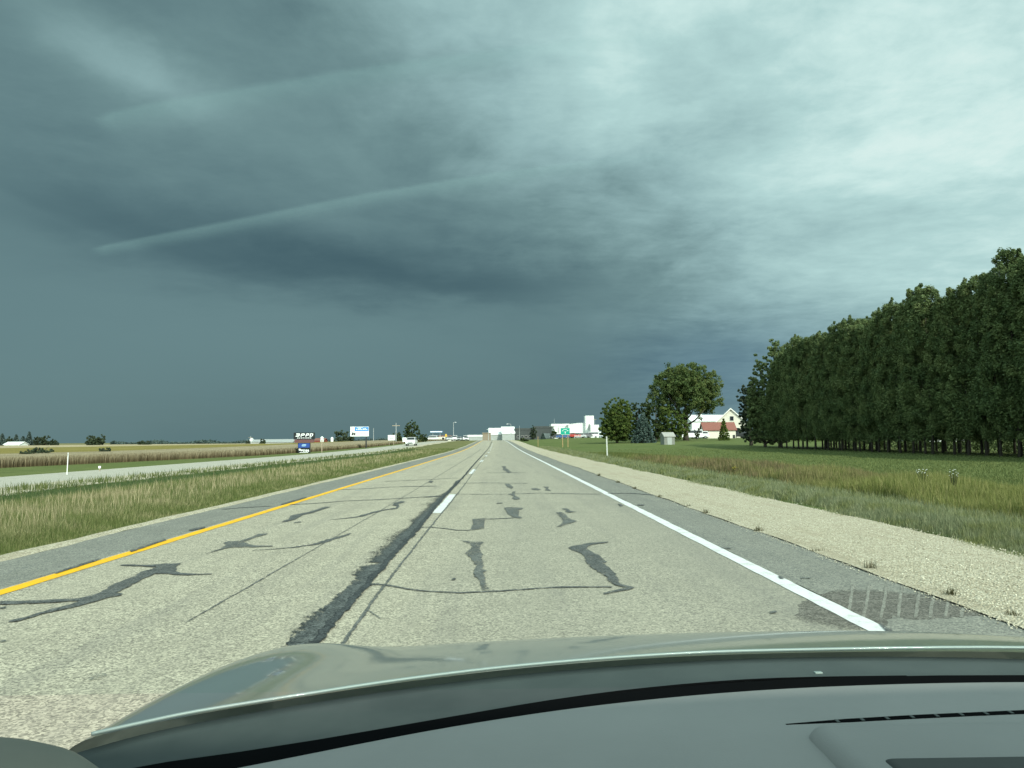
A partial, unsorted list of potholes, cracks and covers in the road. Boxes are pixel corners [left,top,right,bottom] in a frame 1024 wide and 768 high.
crack [372,583,612,593]
